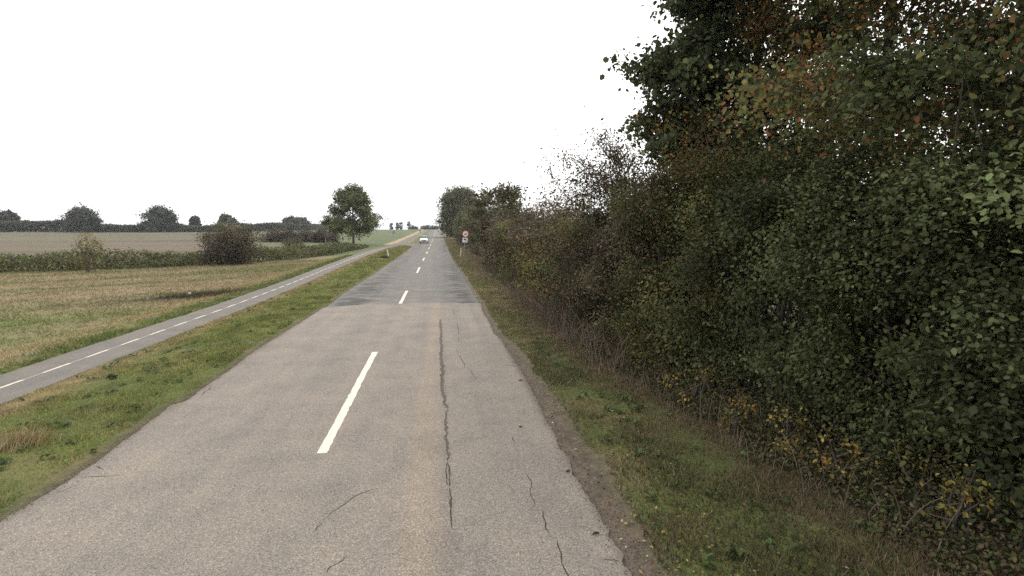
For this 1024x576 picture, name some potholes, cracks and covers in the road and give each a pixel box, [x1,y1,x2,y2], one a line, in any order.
crack [438,319,477,527]
crack [526,473,569,576]
